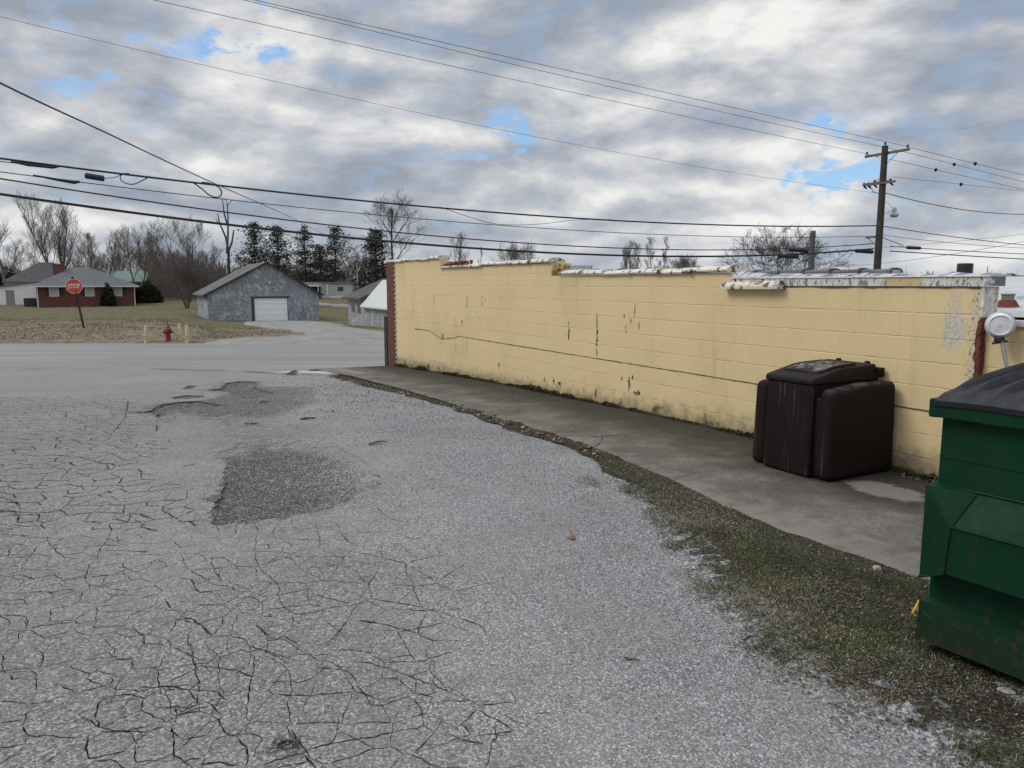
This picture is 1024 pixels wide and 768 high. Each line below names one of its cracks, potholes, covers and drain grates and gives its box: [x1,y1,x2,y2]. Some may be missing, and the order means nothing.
pothole [209,381,274,400]
crack [0,507,549,768]
crack [0,394,215,531]
pothole [276,740,301,751]
pothole [137,401,220,419]
